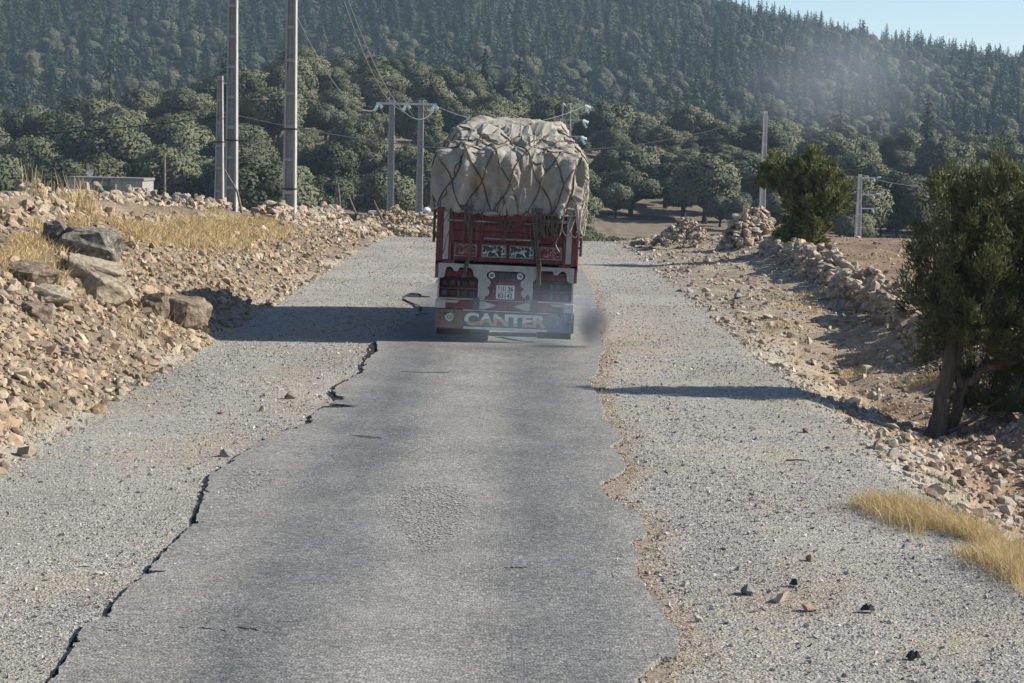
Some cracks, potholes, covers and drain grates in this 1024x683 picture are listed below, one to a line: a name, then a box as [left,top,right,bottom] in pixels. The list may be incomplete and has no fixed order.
crack [305,342,378,424]
crack [403,294,422,315]
crack [106,452,243,617]
crack [46,634,78,683]
